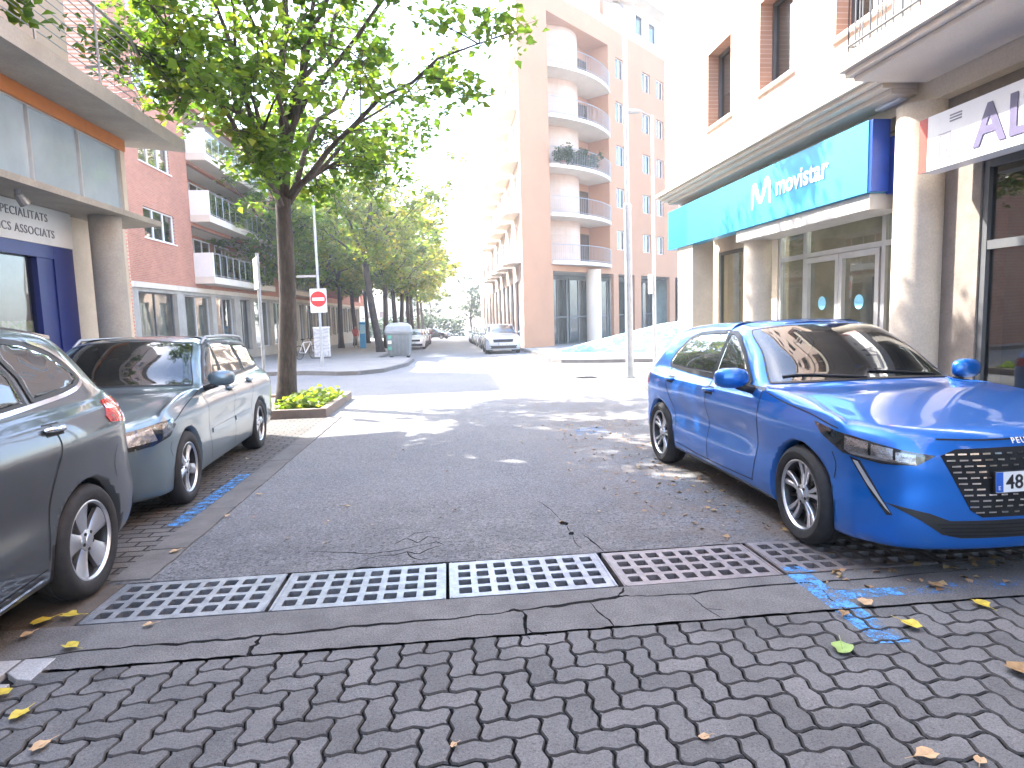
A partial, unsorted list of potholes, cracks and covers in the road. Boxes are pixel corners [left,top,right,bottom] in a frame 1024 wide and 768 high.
crack [286,531,476,581]
drain grate [601,544,784,587]
crack [12,567,994,661]
drain grate [76,573,288,626]
drain grate [268,563,446,612]
drain grate [449,553,618,599]
drain grate [745,536,939,575]
